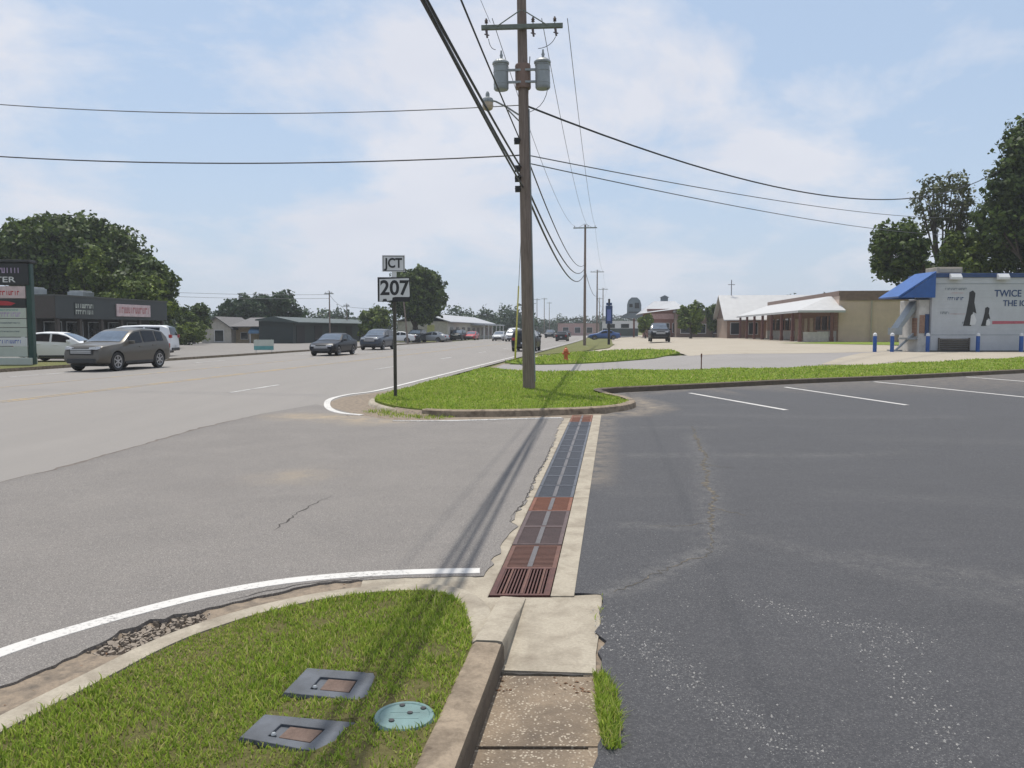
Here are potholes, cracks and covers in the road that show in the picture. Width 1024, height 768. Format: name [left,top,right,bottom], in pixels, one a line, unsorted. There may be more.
crack [614,426,742,592]
drain grate [545,467,580,477]
drain grate [535,486,576,499]
utility cover [282,668,375,701]
drain grate [521,511,570,528]
drain grate [549,459,582,469]
drain grate [528,497,573,511]
drain grate [502,545,562,571]
drain grate [512,526,566,545]
manhole cover [373,701,435,732]
utility cover [239,714,355,752]
drain grate [540,475,578,486]
